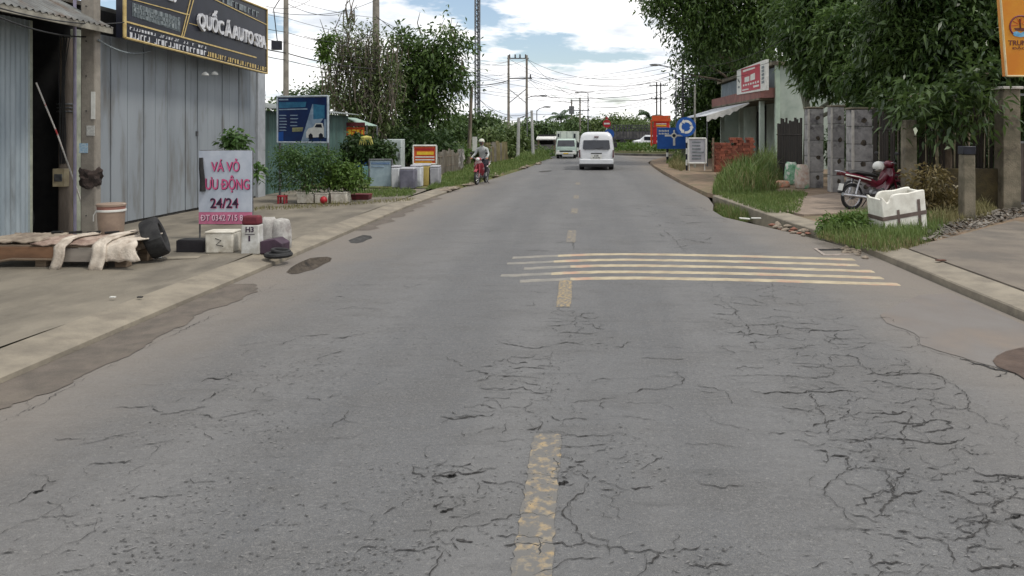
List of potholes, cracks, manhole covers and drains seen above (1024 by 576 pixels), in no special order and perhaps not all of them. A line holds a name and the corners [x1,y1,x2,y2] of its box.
crack [335,283,1024,576]
crack [0,334,353,572]
drain grate [814,248,857,256]
crack [6,282,280,420]
